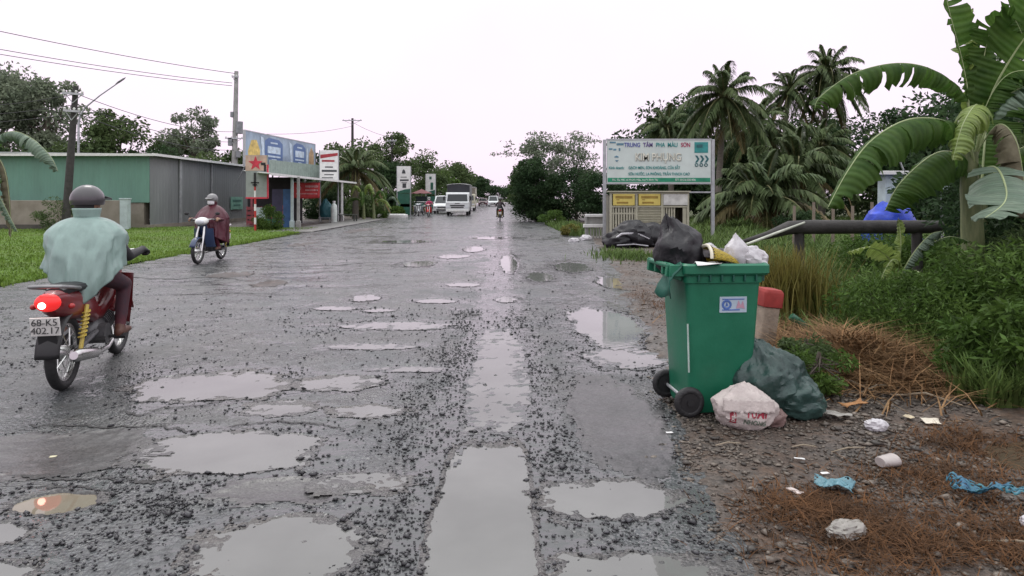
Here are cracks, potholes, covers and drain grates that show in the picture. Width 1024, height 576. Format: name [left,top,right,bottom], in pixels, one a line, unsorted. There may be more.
pothole [562,305,650,352]
pothole [331,321,471,331]
pothole [0,487,113,517]
pothole [499,254,519,275]
pothole [322,403,421,419]
pothole [451,317,537,466]
pothole [522,476,699,527]
pothole [110,427,333,481]
pothole [574,344,669,371]
pothole [290,374,391,393]
pothole [112,367,302,404]
